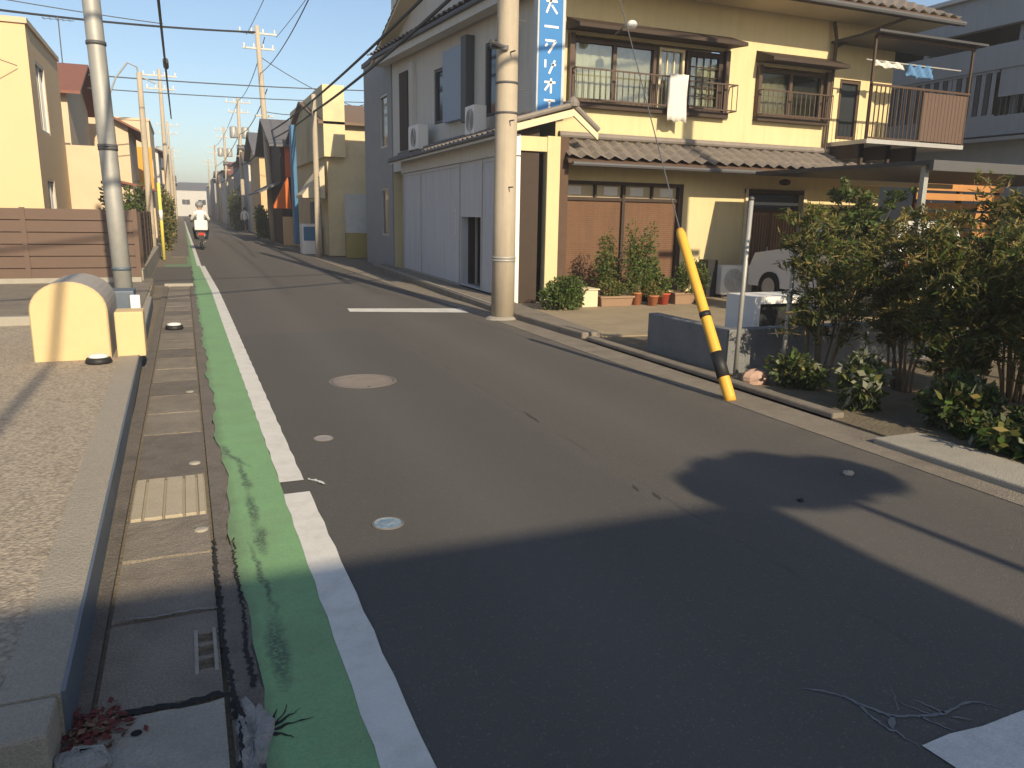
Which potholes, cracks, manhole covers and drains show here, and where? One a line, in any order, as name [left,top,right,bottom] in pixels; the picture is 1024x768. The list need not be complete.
crack [273,704,314,737]
manhole cover [372,517,404,530]
manhole cover [329,374,397,388]
crack [106,537,258,768]
drain grate [130,474,207,523]
crack [803,688,1002,745]
